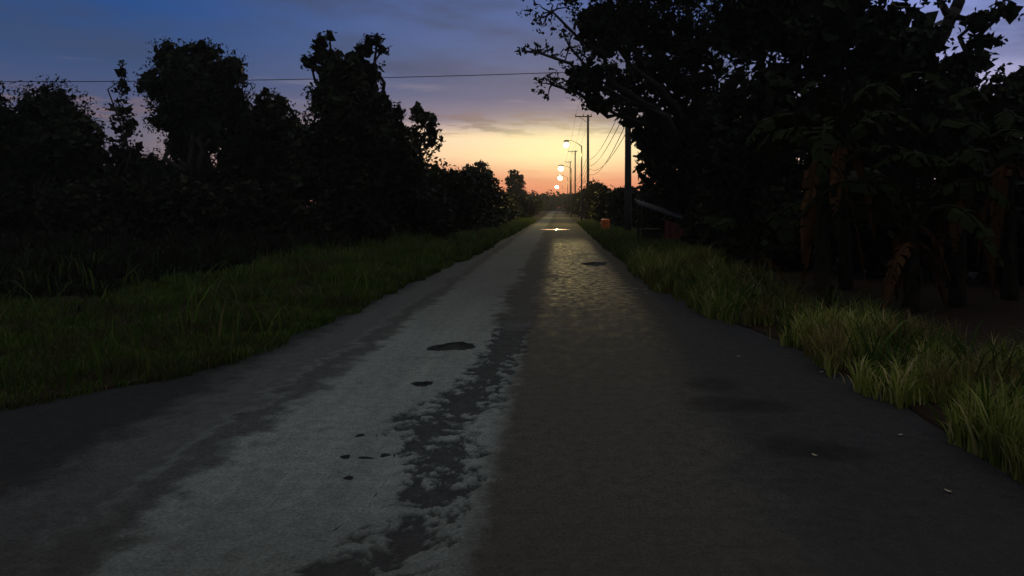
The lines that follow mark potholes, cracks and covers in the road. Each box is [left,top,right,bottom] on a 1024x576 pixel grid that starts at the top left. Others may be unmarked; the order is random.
pothole [427,342,476,351]
